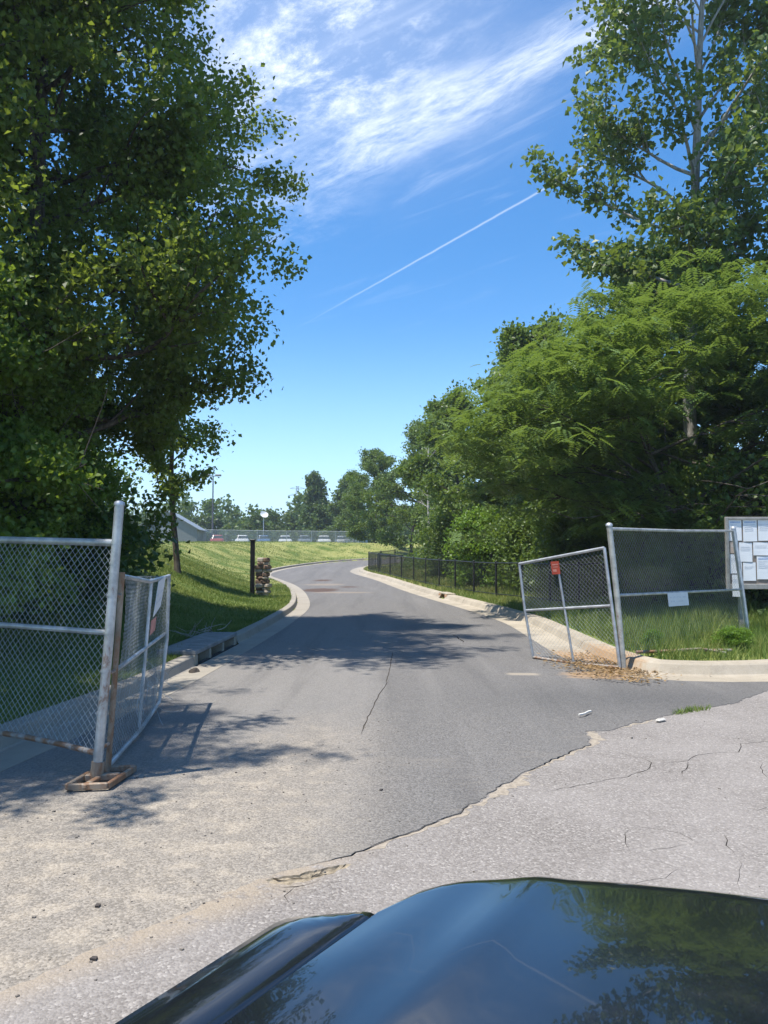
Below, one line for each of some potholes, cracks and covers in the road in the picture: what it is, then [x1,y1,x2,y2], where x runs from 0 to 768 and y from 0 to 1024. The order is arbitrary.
crack [546,741,768,792]
drain grate [147,632,237,666]
crack [511,753,768,889]
crack [361,652,393,734]
